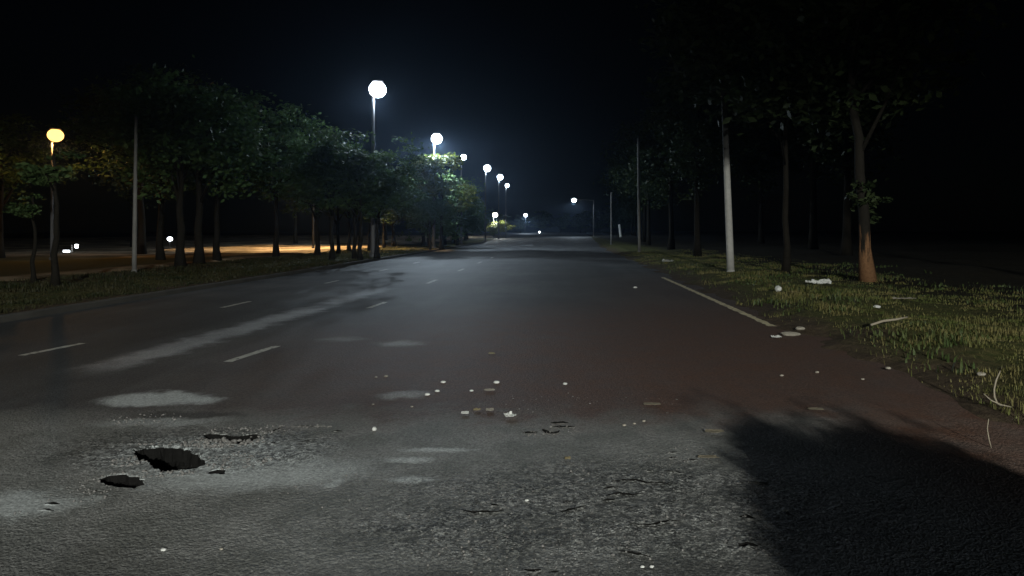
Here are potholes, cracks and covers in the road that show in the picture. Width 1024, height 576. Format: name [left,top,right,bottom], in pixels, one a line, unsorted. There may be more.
pothole [97,473,145,489]
crack [560,451,699,513]
pothole [199,433,264,444]
crack [461,503,505,514]
crack [618,550,651,558]
pothole [132,445,208,472]
crack [523,421,575,434]
